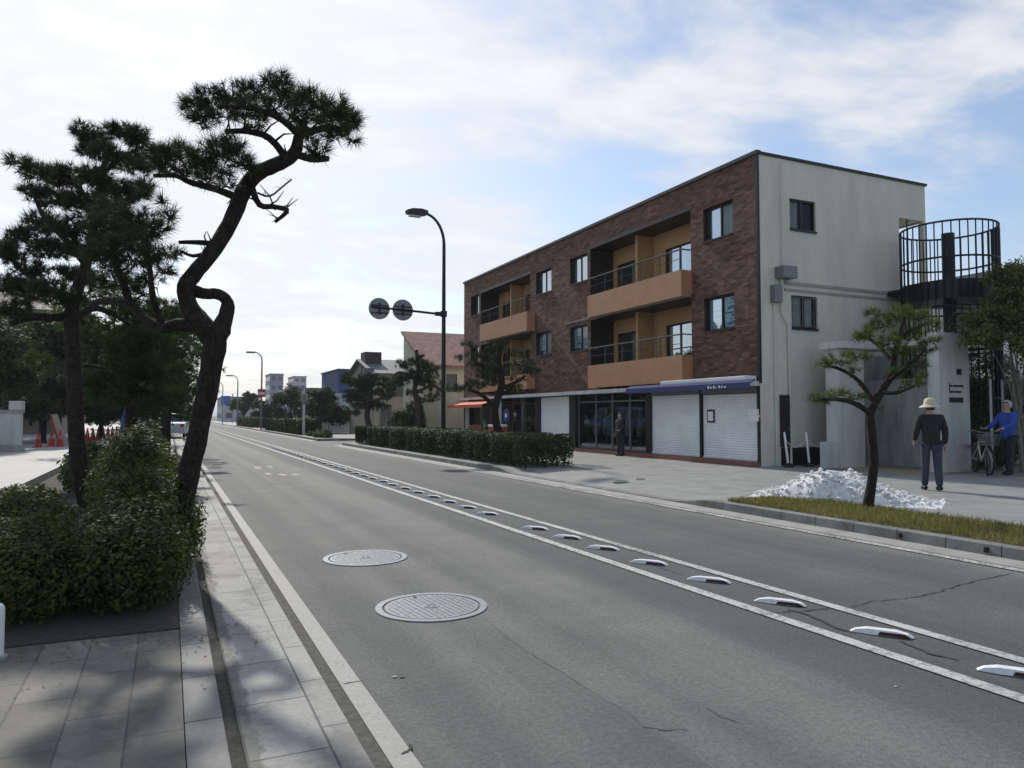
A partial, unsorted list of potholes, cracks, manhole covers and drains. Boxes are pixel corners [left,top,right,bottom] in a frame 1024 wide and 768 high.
crack [853,572,1014,606]
manhole cover [375,593,488,622]
manhole cover [322,550,408,566]
crack [781,608,855,633]
crack [901,641,959,660]
